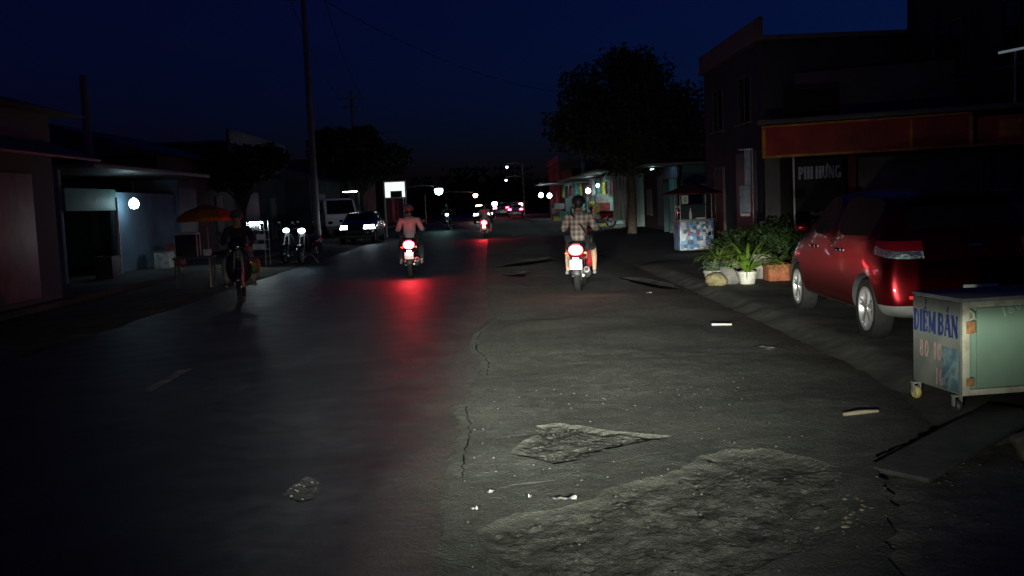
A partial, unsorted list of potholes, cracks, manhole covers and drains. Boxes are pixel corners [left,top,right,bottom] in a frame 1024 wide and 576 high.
crack [460,318,498,478]
pothole [496,257,558,267]
pothole [619,277,683,290]
